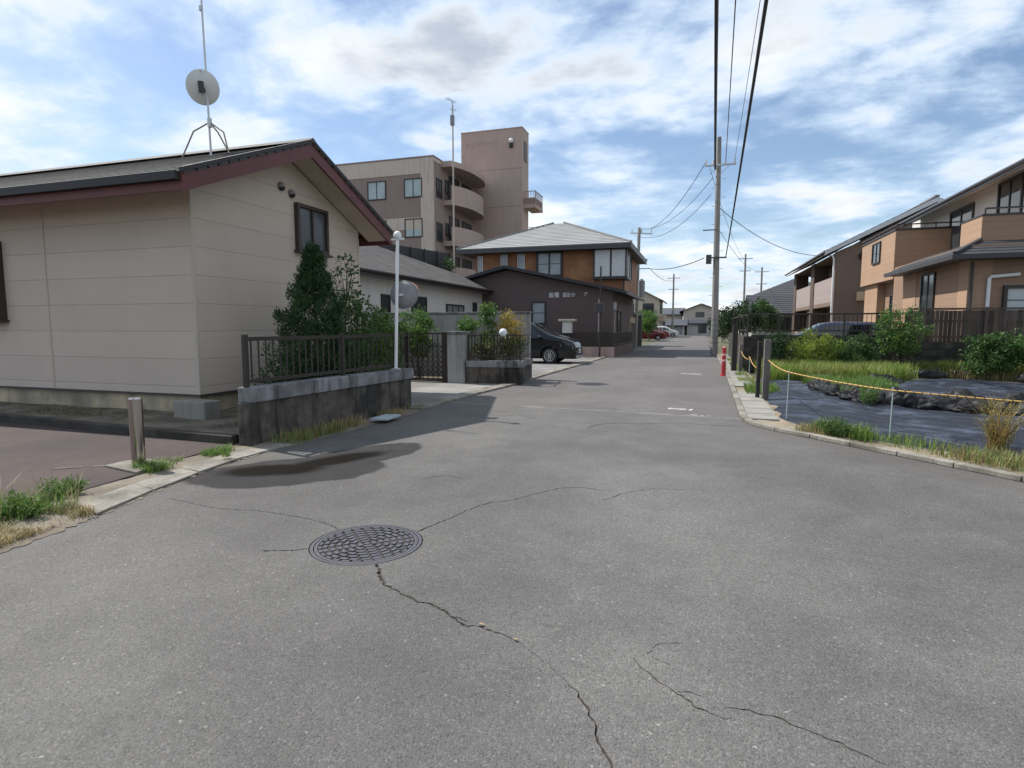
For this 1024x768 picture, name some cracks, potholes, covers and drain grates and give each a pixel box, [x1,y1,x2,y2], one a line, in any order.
crack [419,487,672,531]
crack [633,643,888,766]
manhole cover [309,525,422,572]
crack [375,564,613,768]
crack [167,498,338,530]
